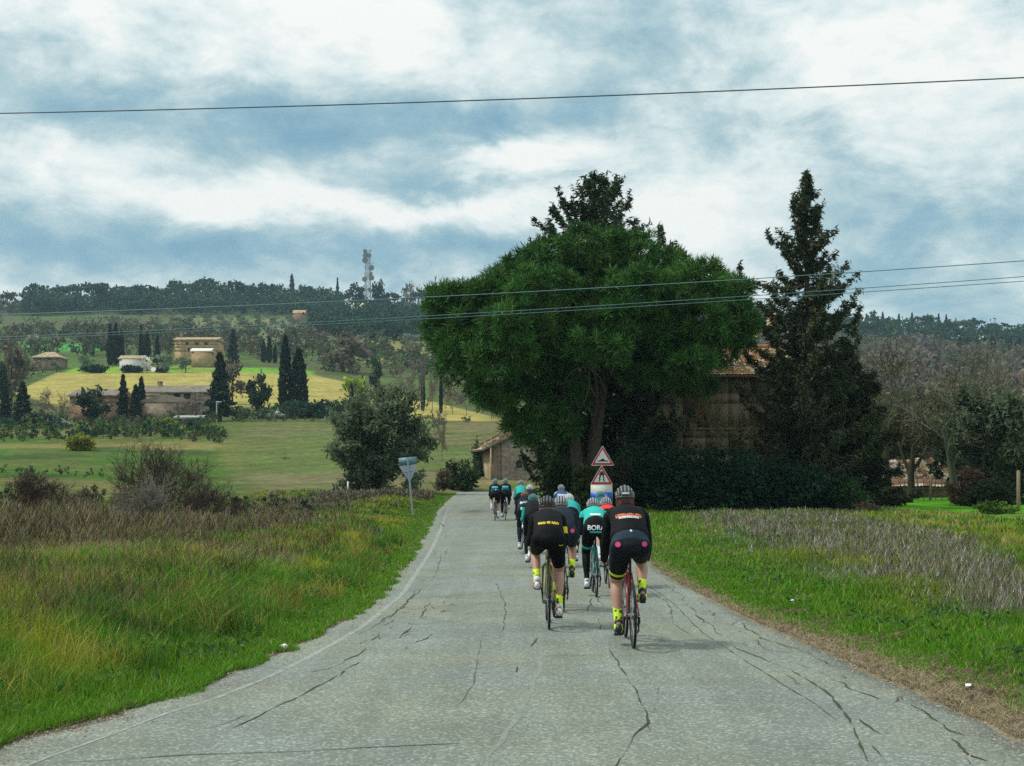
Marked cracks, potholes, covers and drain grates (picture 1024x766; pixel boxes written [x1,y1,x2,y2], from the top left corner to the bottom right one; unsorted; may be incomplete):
crack [206,523,507,728]
crack [610,650,659,766]
crack [650,582,987,763]
crack [31,742,483,765]
